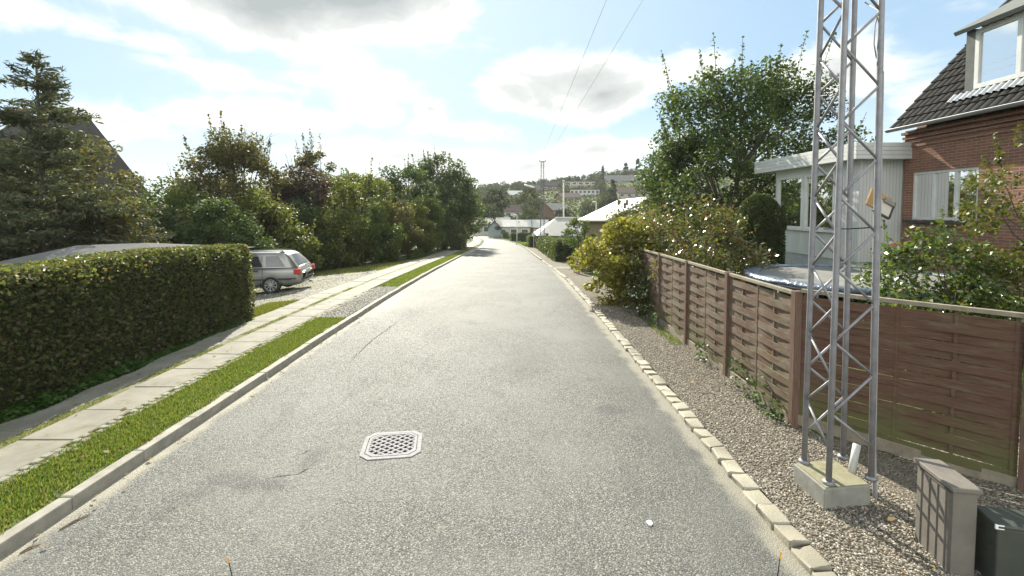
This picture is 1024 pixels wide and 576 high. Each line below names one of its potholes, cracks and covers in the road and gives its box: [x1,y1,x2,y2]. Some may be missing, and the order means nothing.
drain grate [359,430,422,460]
